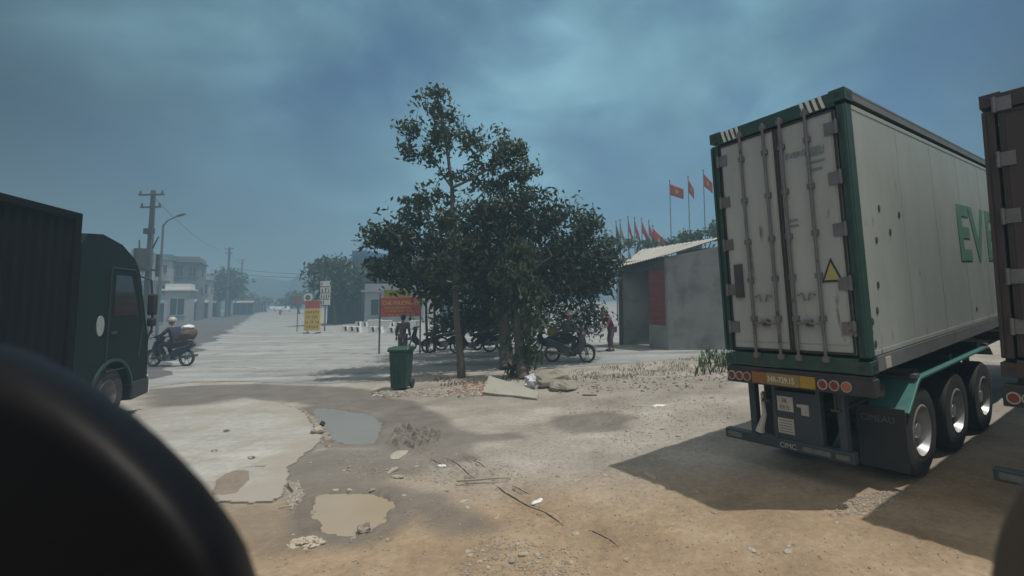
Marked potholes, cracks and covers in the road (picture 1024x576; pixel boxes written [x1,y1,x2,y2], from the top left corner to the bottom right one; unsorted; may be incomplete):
pothole [386,422,447,451]
pothole [294,486,409,541]
pothole [307,406,392,446]
